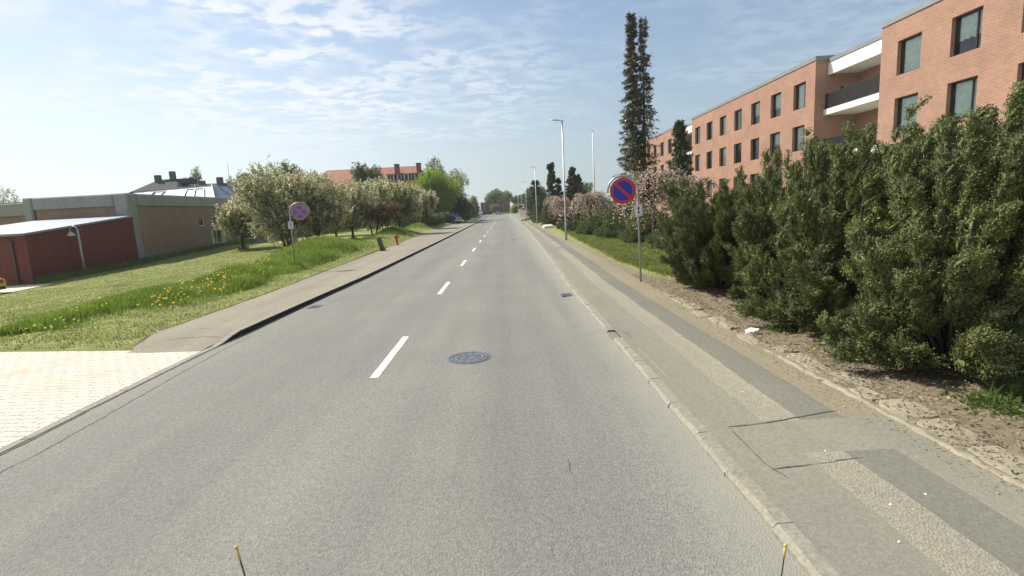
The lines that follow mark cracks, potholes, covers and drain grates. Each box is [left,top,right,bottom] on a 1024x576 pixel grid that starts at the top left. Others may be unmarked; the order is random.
manhole cover [447,351,491,364]
